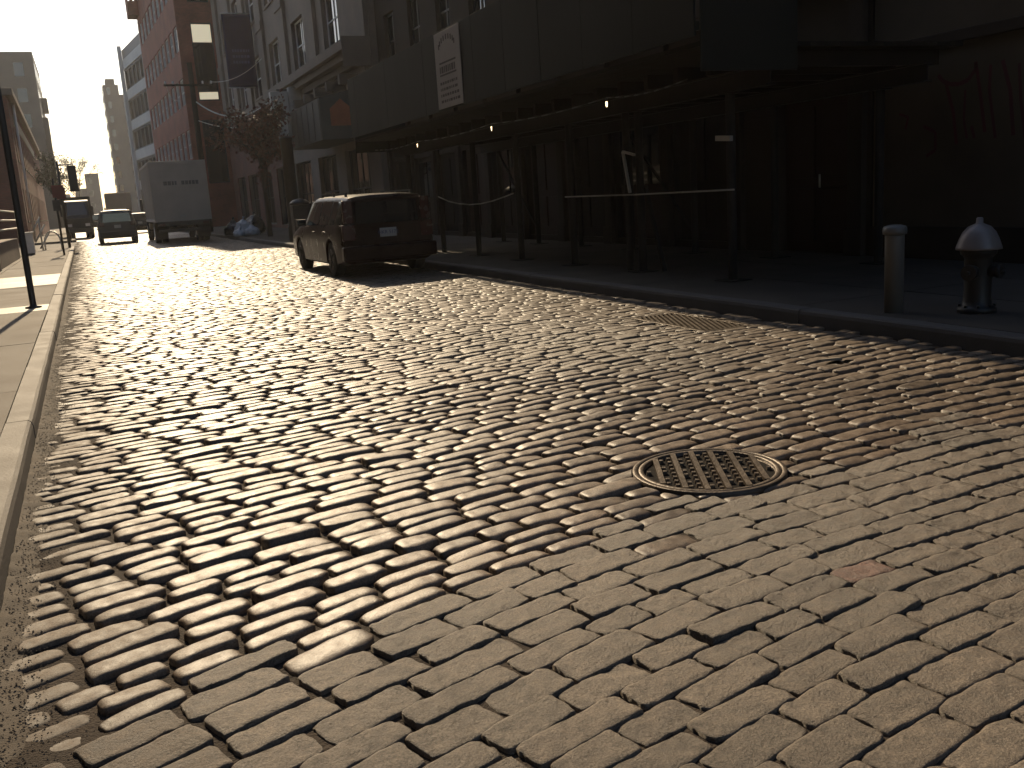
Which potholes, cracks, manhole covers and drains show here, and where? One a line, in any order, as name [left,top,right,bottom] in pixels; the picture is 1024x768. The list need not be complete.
drain grate [631,312,752,331]
